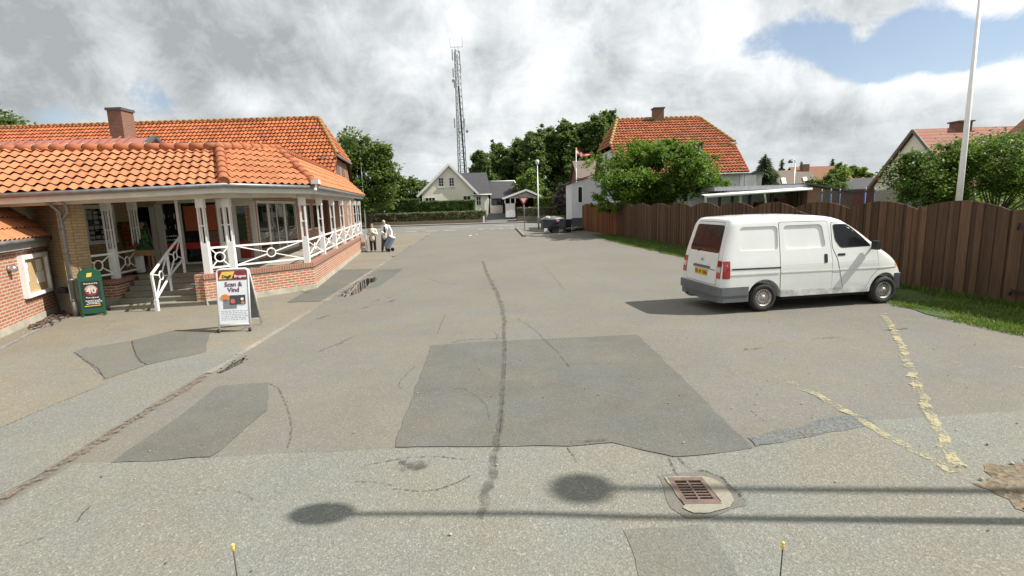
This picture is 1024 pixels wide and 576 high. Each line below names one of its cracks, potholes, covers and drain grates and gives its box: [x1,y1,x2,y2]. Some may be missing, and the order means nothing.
pothole [217,358,248,373]
crack [357,456,470,491]
